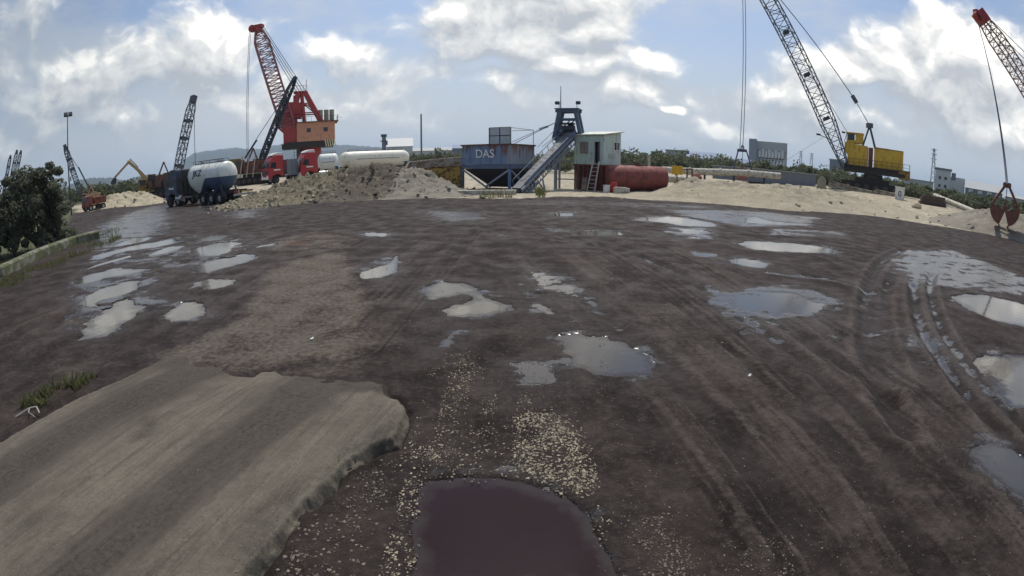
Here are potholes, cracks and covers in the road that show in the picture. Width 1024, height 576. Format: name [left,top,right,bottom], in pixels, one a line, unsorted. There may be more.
pothole [344,253,413,282]
pothole [961,347,1024,416]
pothole [543,328,674,384]
pothole [395,469,635,576]
pothole [719,238,851,257]
pothole [149,297,221,326]
pothole [934,289,1024,331]
pothole [954,433,1024,507]
pothole [62,293,158,347]
pothole [407,277,530,321]
